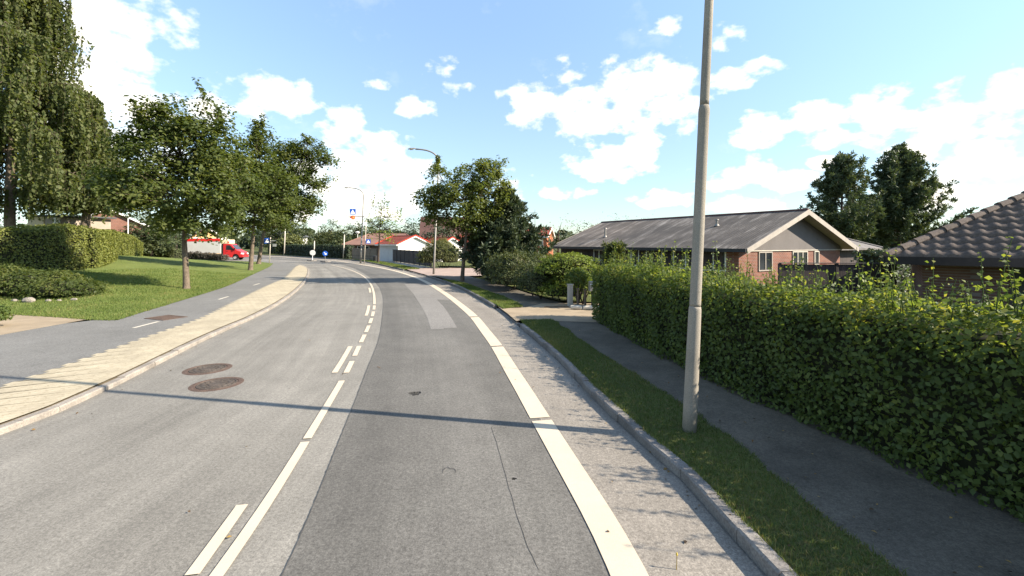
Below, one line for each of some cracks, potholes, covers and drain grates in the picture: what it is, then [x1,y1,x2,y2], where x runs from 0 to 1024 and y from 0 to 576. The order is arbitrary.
manhole cover [182,363,233,375]
crack [491,426,539,569]
manhole cover [188,377,244,392]
